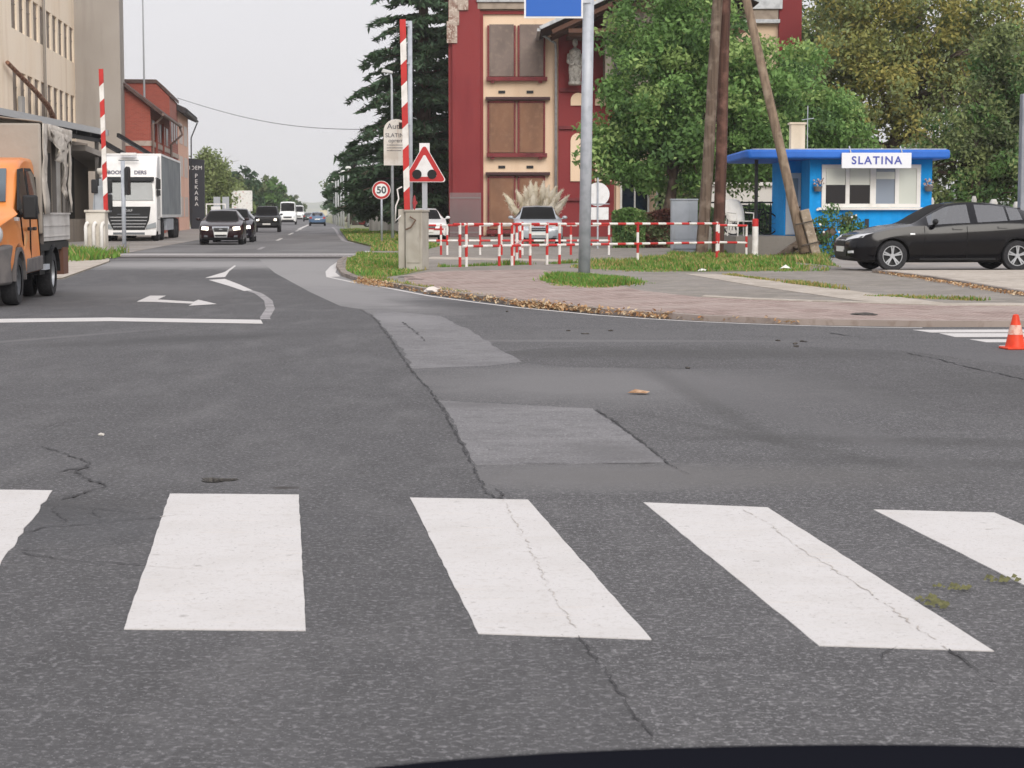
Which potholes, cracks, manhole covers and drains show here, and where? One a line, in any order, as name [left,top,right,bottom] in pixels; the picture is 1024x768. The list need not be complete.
crack [906,352,1024,380]
crack [596,409,684,472]
crack [25,446,380,532]
